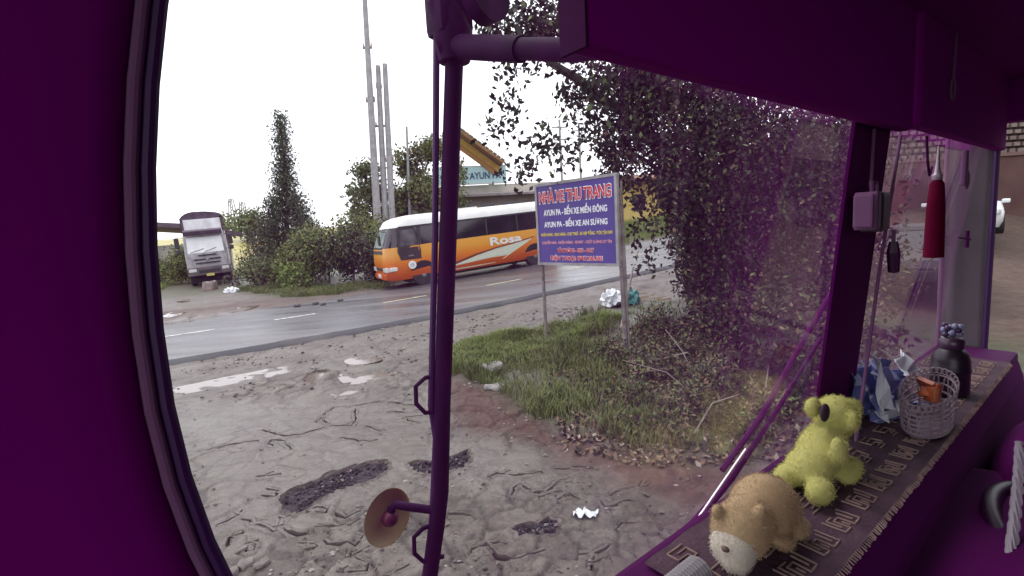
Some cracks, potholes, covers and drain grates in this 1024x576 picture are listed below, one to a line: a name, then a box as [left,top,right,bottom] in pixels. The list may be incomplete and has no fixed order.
crack [448,510,477,520]
crack [198,401,425,452]
pothole [300,369,341,385]
crack [452,538,547,574]
crack [488,465,654,574]
crack [217,470,411,576]
